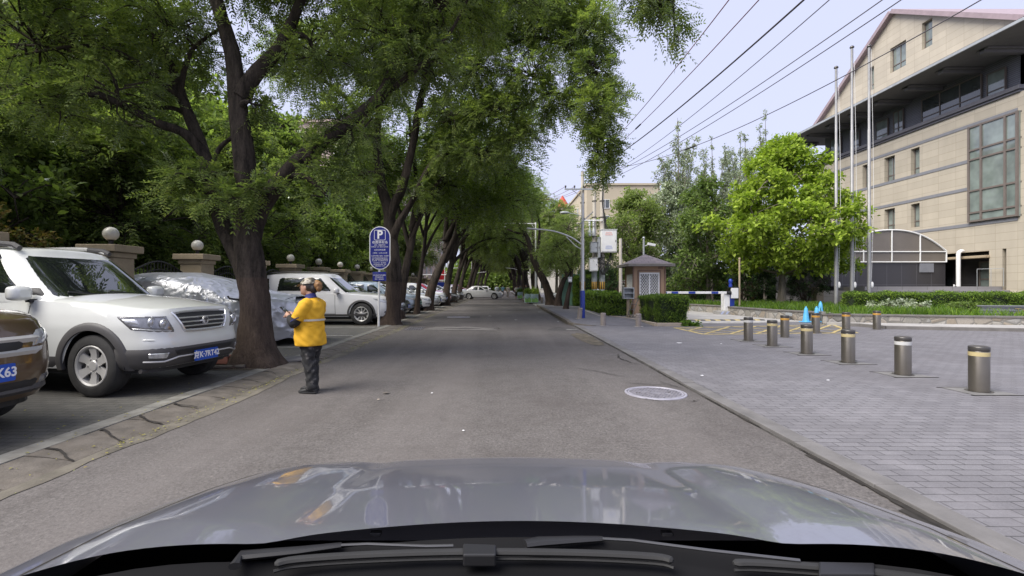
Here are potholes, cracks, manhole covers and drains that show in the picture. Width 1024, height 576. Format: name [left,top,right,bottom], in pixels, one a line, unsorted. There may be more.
manhole cover [624,386,688,400]
